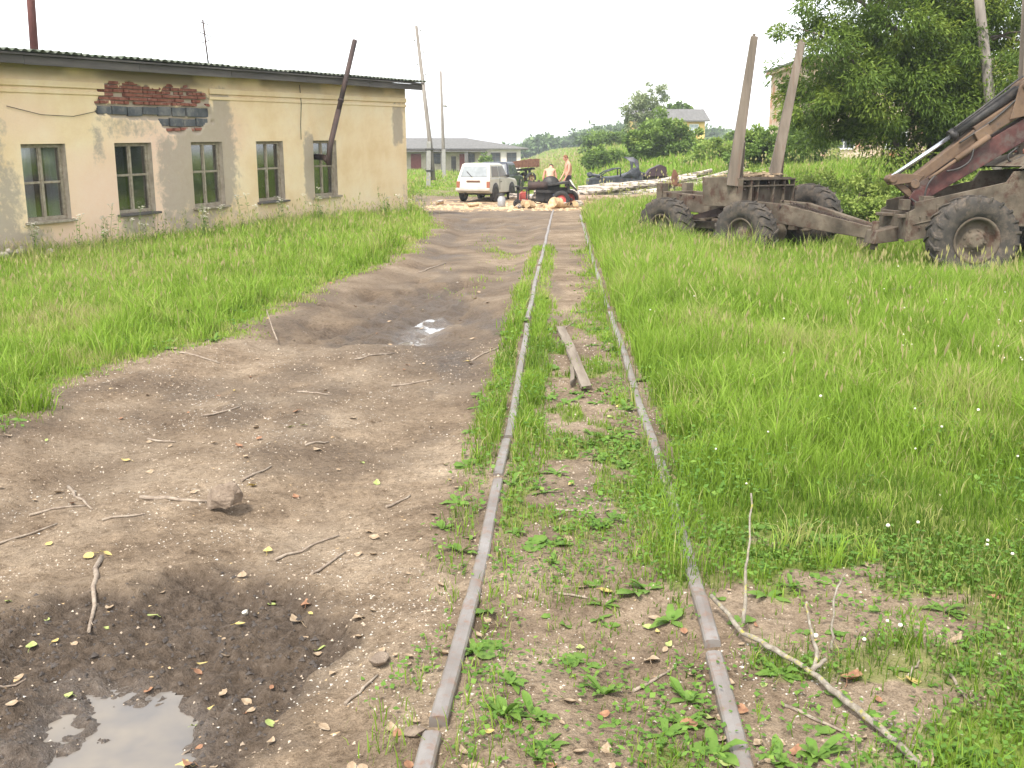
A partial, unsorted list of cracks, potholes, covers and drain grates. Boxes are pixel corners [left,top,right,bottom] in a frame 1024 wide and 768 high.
pothole [290,275,502,352]
pothole [0,561,371,768]
